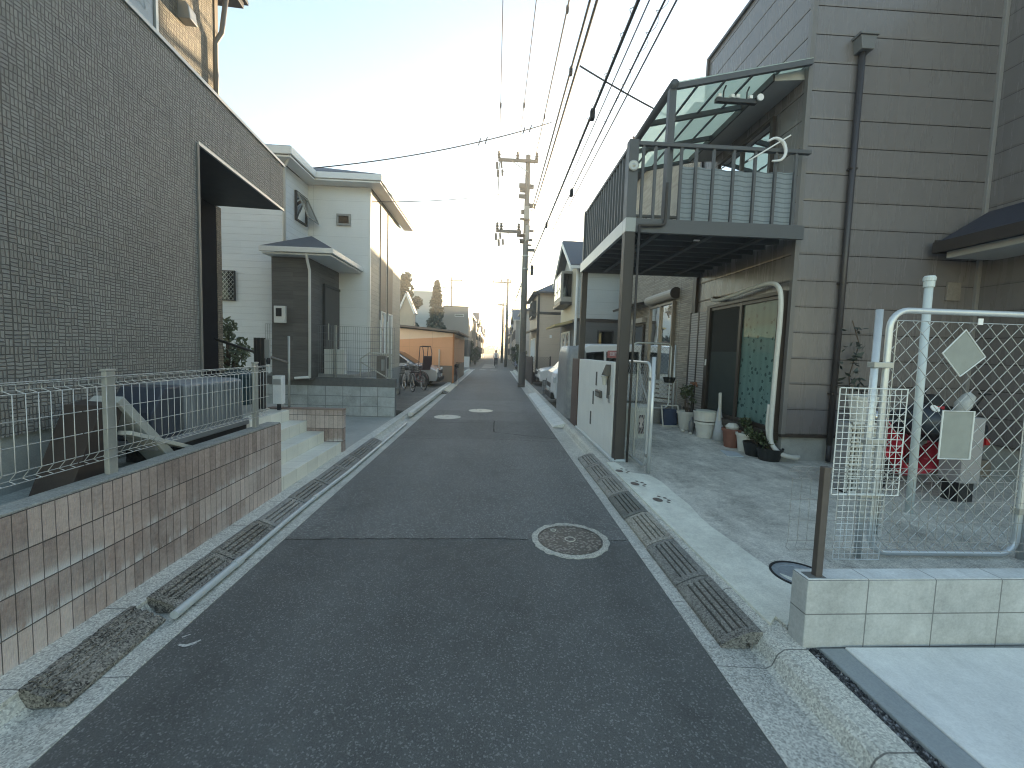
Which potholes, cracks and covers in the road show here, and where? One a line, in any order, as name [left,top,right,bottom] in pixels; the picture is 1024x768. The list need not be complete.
manhole cover [769,561,812,584]
manhole cover [532,523,610,559]
